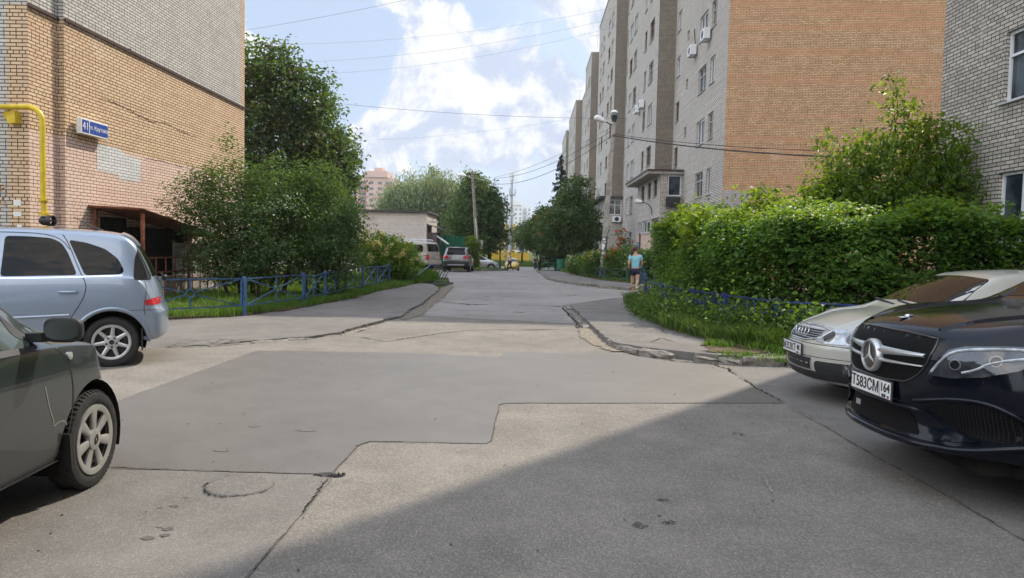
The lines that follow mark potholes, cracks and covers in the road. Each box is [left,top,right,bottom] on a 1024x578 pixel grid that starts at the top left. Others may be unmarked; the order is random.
manhole cover [201,475,274,497]
